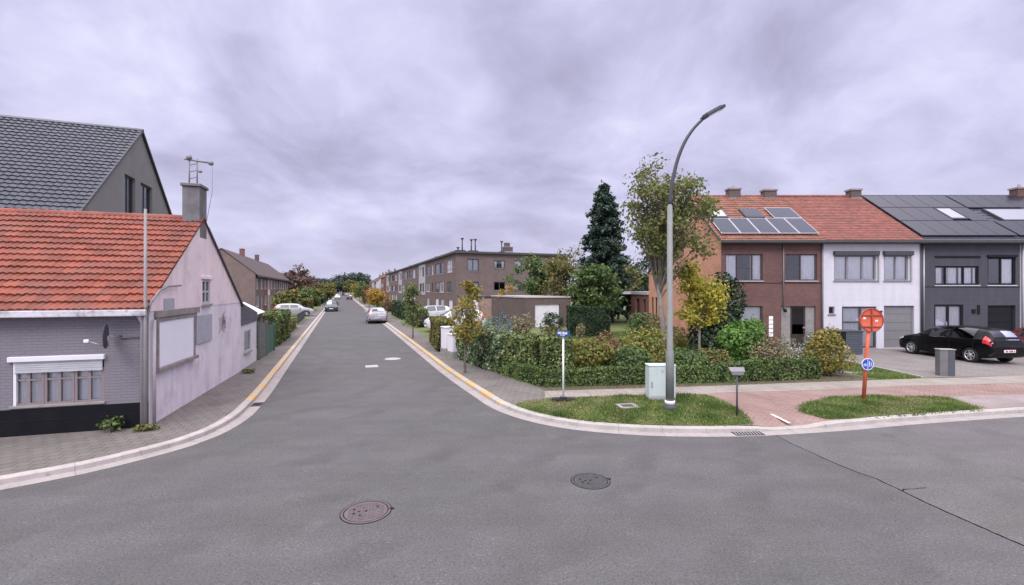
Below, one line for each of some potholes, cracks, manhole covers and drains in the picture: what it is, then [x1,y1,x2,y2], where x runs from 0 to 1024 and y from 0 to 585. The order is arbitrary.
manhole cover [571,473,611,490]
manhole cover [339,500,394,524]
